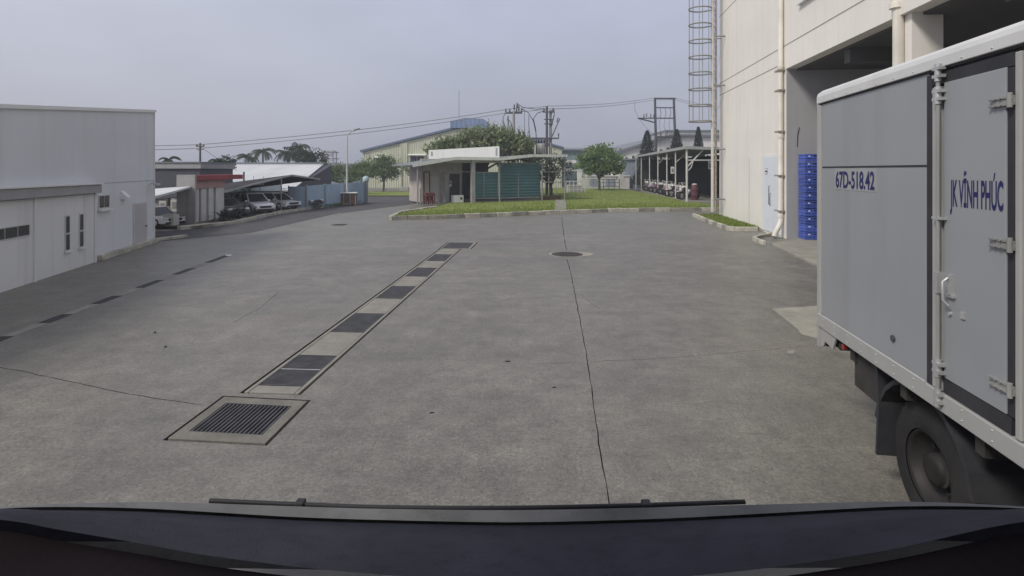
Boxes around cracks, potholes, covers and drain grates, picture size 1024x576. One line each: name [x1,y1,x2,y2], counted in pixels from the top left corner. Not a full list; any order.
crack [488,217,808,504]
drain grate [190,403,292,435]
crack [0,367,200,405]
drain grate [406,268,437,277]
drain grate [330,313,384,333]
drain grate [259,355,337,387]
drain grate [376,286,416,299]
